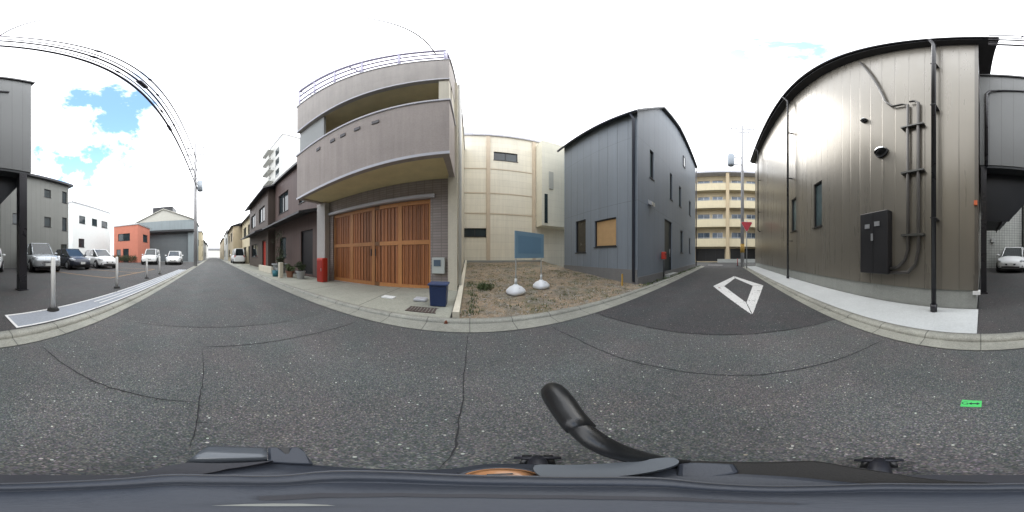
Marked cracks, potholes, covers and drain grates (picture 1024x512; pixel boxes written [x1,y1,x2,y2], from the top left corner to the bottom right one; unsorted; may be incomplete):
crack [43,347,189,402]
drain grate [405,306,439,314]
crack [554,328,885,377]
crack [210,324,349,347]
